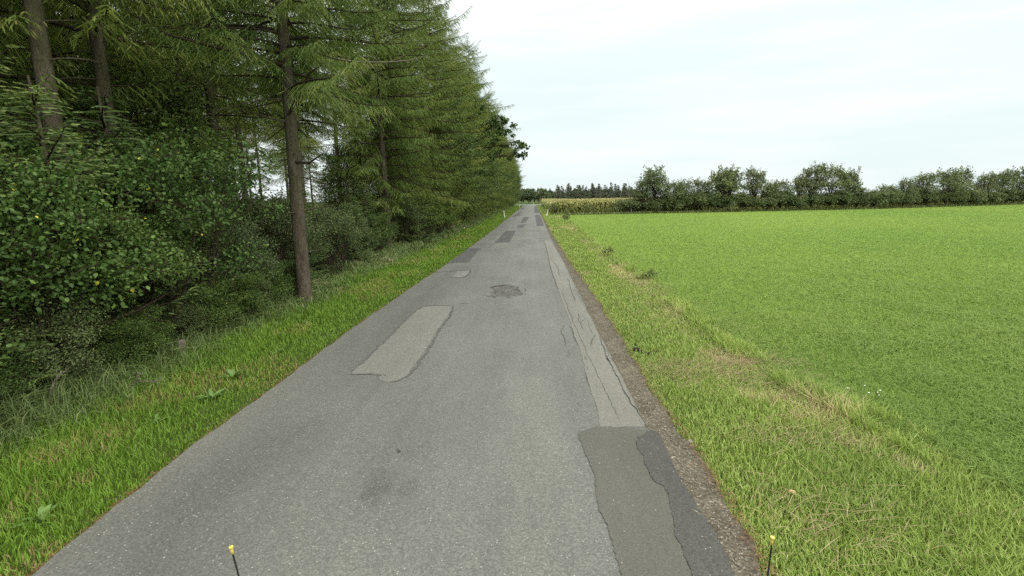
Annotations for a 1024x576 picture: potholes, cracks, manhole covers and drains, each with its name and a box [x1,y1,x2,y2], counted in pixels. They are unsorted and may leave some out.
crack [533,238,647,427]
